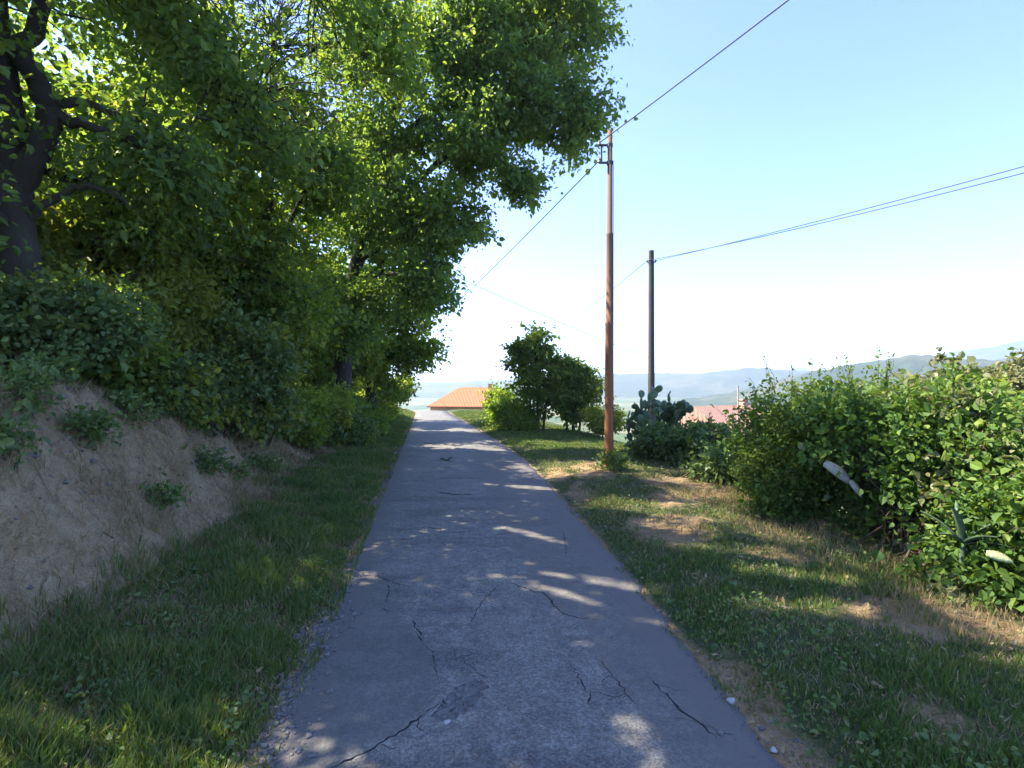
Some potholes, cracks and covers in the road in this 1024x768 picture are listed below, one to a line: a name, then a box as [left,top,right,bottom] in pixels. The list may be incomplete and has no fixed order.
crack [566,656,734,739]
crack [413,621,488,678]
pothole [431,678,489,721]
crack [378,575,405,612]
crack [331,703,439,768]
crack [471,582,588,622]
